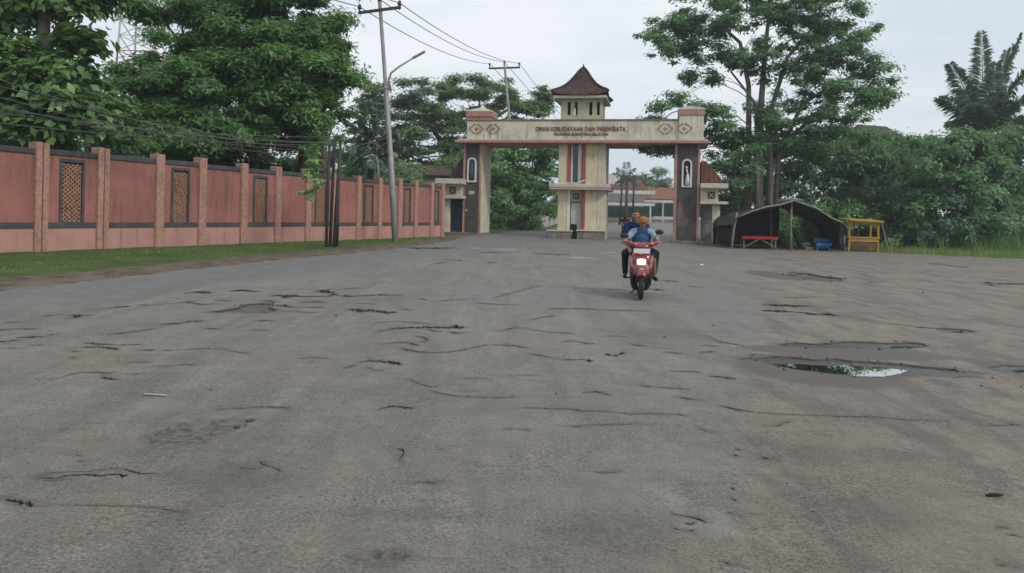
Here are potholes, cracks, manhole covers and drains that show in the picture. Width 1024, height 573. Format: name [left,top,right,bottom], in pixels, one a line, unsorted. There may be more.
crack [60,329,249,380]
crack [219,406,287,429]
crack [6,499,33,507]
pothole [211,301,280,313]
pothole [988,365,1024,373]
crack [539,337,757,431]
crack [674,514,706,531]
pothole [755,356,965,378]
crack [35,455,155,481]
pothole [782,272,847,282]
crack [74,504,183,512]
pothole [780,340,928,350]
